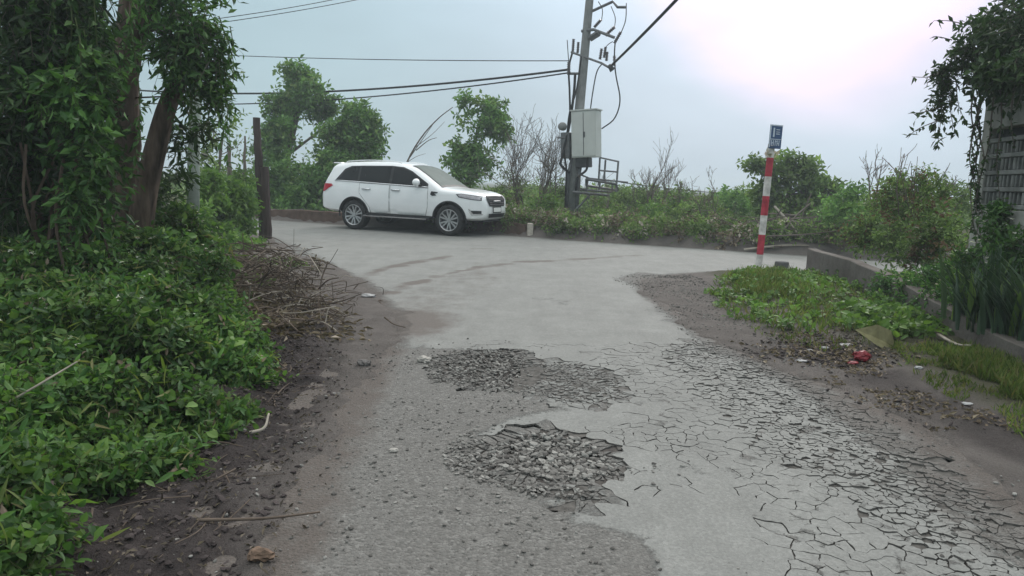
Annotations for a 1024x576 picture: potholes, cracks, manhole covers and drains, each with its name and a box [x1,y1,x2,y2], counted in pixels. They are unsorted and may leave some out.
pothole [424,348,548,394]
pothole [442,419,661,499]
crack [514,339,1024,576]
